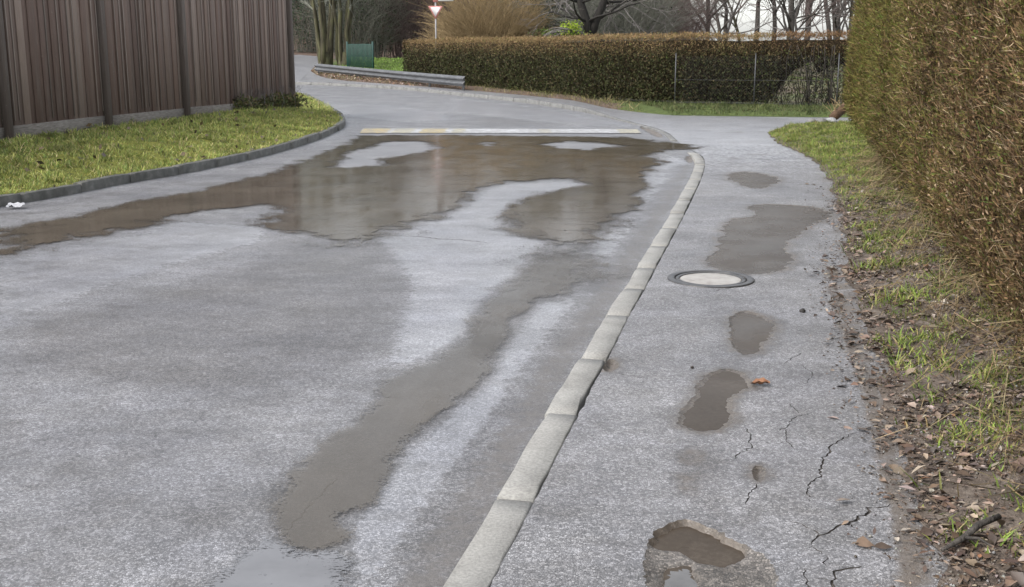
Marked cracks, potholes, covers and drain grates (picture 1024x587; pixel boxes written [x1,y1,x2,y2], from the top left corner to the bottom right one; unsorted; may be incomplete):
pothole [642,519,779,587]
pothole [727,311,779,355]
pothole [752,466,766,481]
manhole cover [667,270,755,288]
pothole [676,369,754,432]
crack [744,430,893,587]
